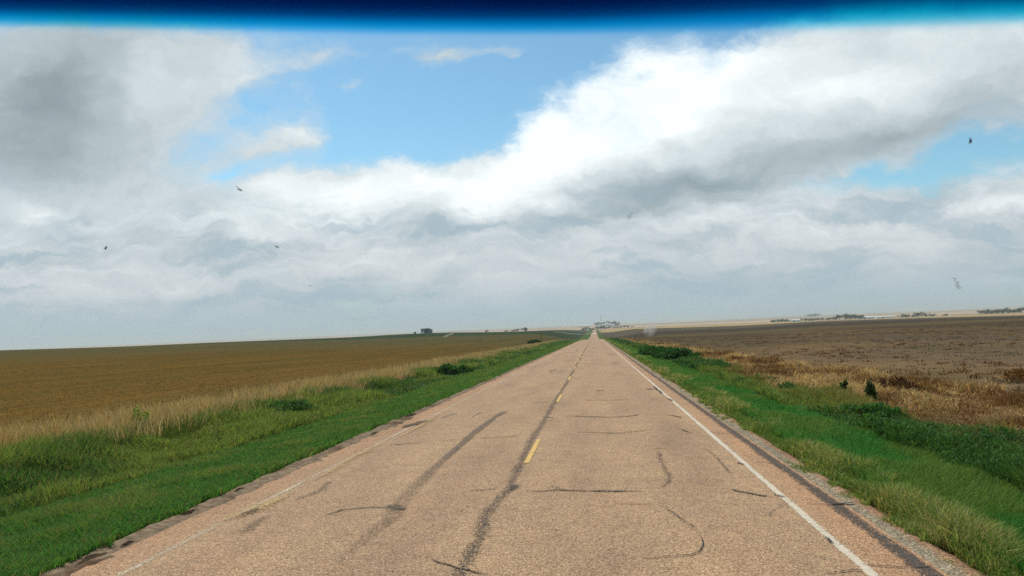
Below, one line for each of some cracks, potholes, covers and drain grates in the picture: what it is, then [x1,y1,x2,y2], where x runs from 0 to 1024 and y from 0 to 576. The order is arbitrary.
crack [733,489,786,514]
